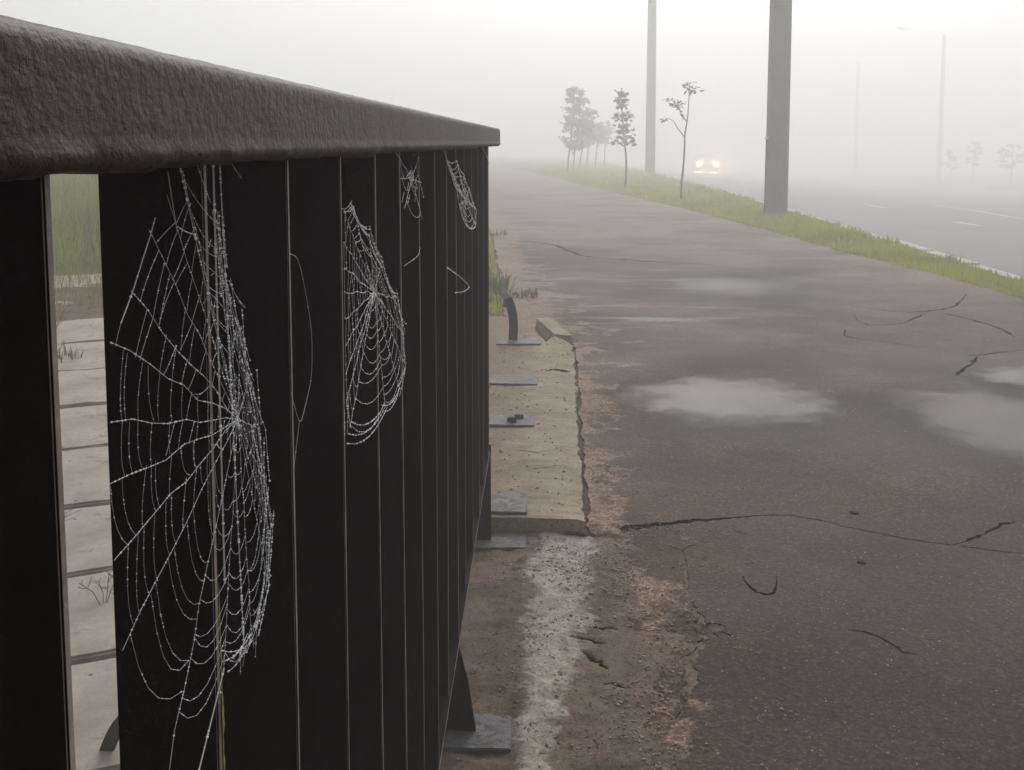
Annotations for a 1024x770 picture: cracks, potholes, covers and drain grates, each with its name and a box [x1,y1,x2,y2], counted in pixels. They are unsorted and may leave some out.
crack [620,515,1011,552]
crack [844,295,1014,345]
crack [669,546,716,720]
crack [578,626,623,688]
